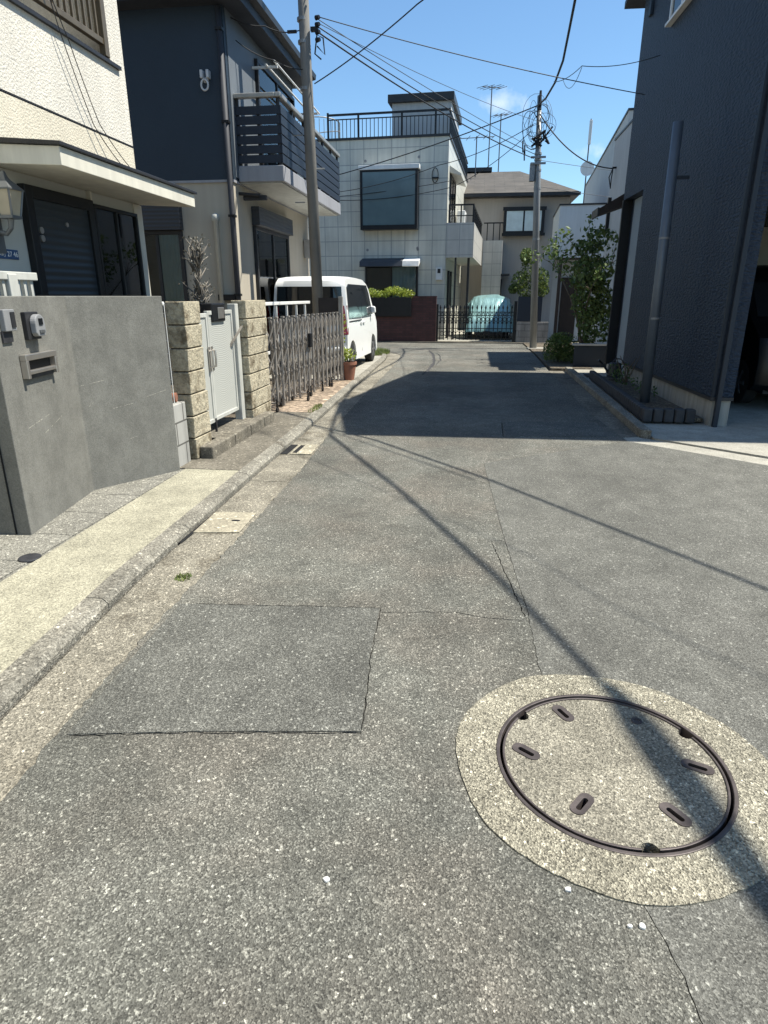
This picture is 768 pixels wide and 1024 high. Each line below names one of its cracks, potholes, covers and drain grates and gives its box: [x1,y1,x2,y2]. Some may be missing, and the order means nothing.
crack [487,478,536,649]
manhole cover [456,674,768,907]
